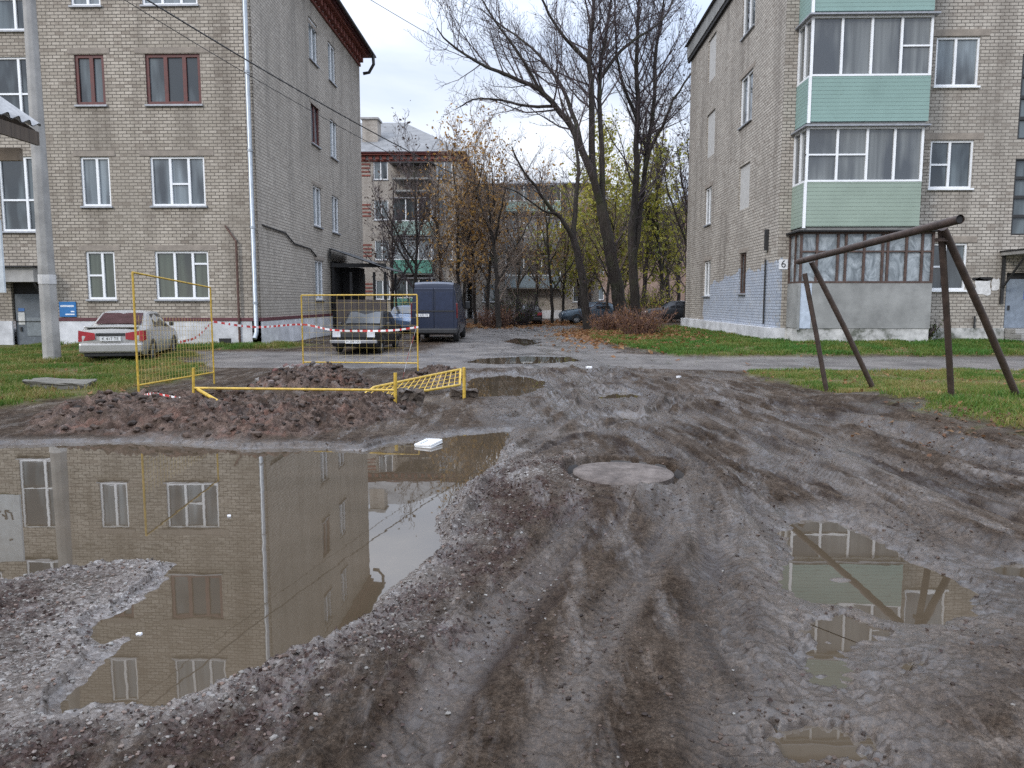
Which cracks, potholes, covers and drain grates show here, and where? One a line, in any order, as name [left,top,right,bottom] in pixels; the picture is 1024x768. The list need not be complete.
pothole [504,338,542,346]
pothole [460,371,550,397]
manhole cover [567,460,684,486]
pothole [465,356,581,364]
